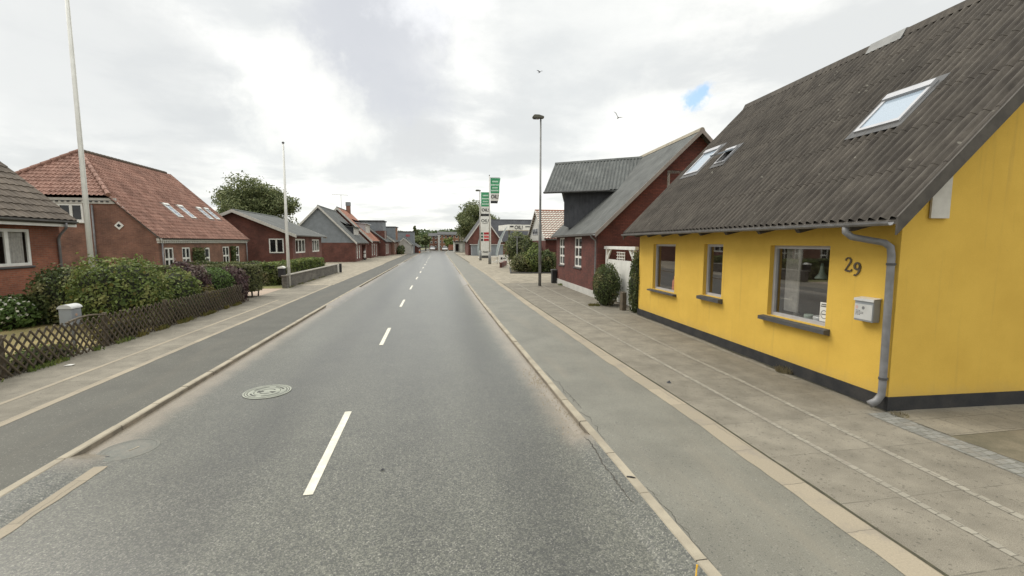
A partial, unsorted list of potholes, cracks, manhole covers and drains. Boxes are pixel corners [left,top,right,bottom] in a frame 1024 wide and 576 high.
manhole cover [242,385,292,400]
manhole cover [96,438,161,462]
